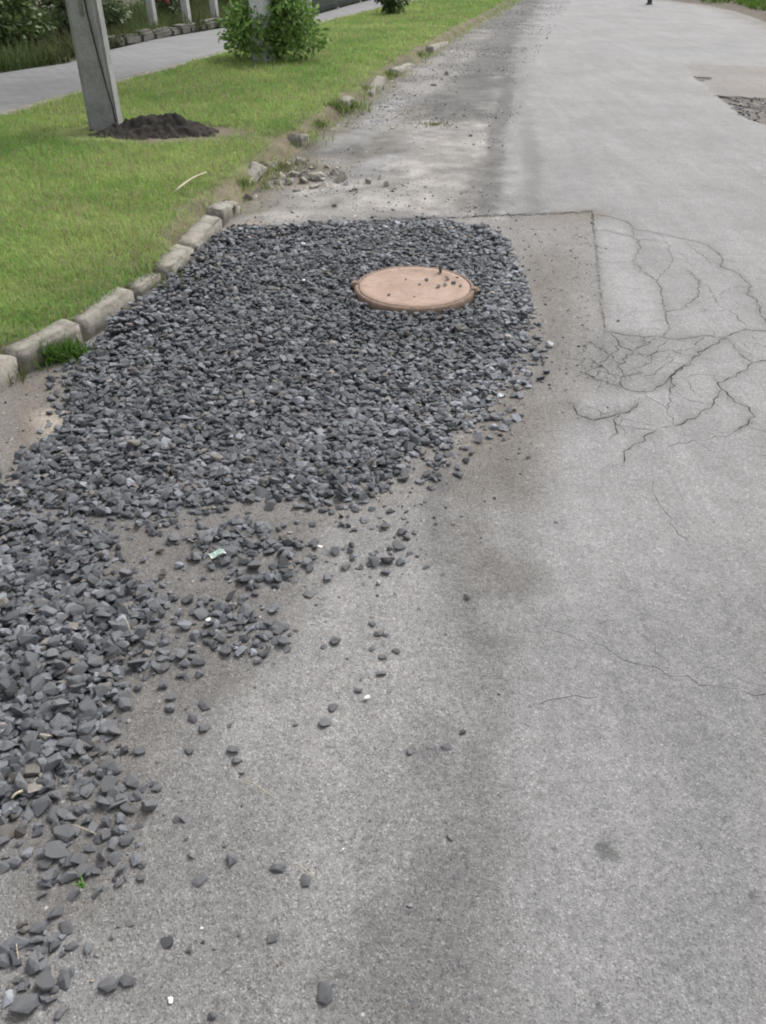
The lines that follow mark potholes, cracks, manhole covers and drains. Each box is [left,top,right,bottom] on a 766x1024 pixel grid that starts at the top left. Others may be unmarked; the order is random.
pothole [714,95,766,125]
manhole cover [351,266,479,316]
crack [546,626,766,696]
crack [565,214,766,463]
